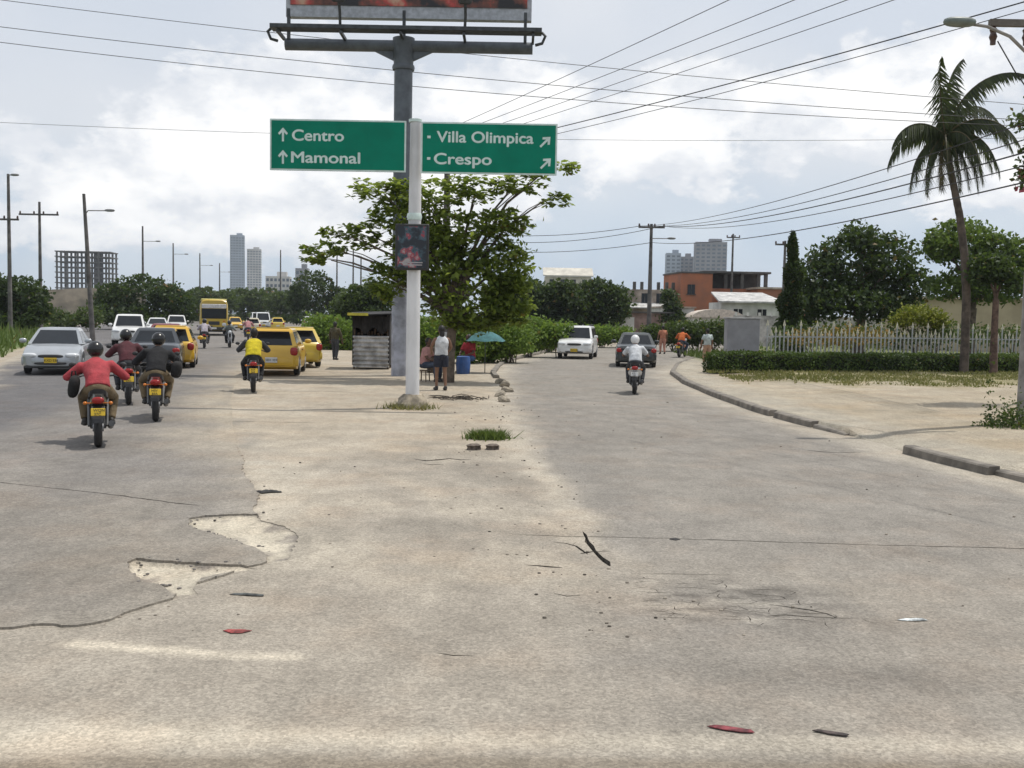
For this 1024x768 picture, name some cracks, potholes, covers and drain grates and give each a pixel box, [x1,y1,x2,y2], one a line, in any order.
crack [531,532,1016,568]
pothole [129,557,253,596]
crack [652,582,836,626]
pothole [189,511,298,563]
crack [0,482,190,505]
